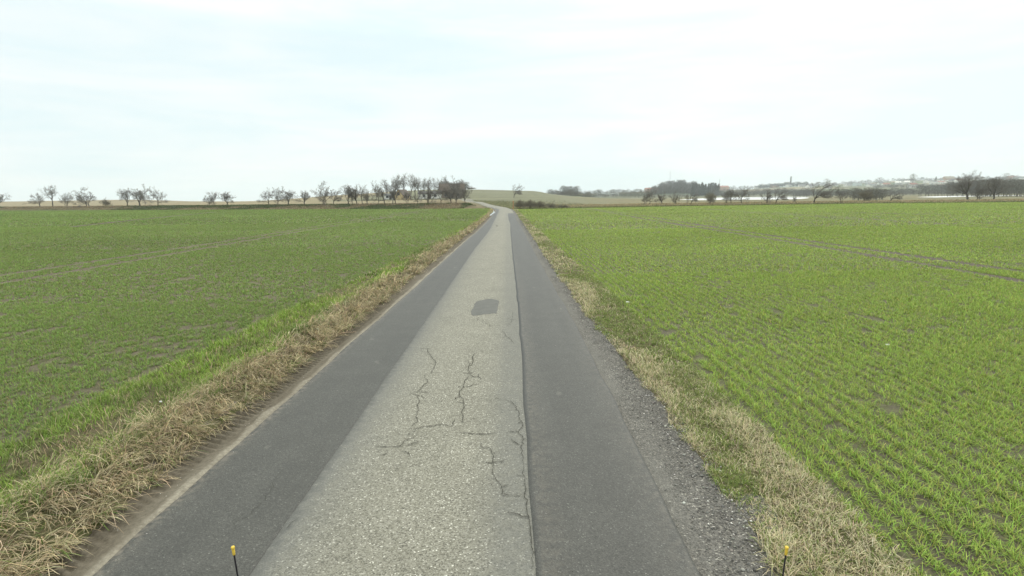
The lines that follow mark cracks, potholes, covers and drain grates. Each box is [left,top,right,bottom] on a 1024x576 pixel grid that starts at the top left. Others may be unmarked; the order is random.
crack [374,348,534,562]
